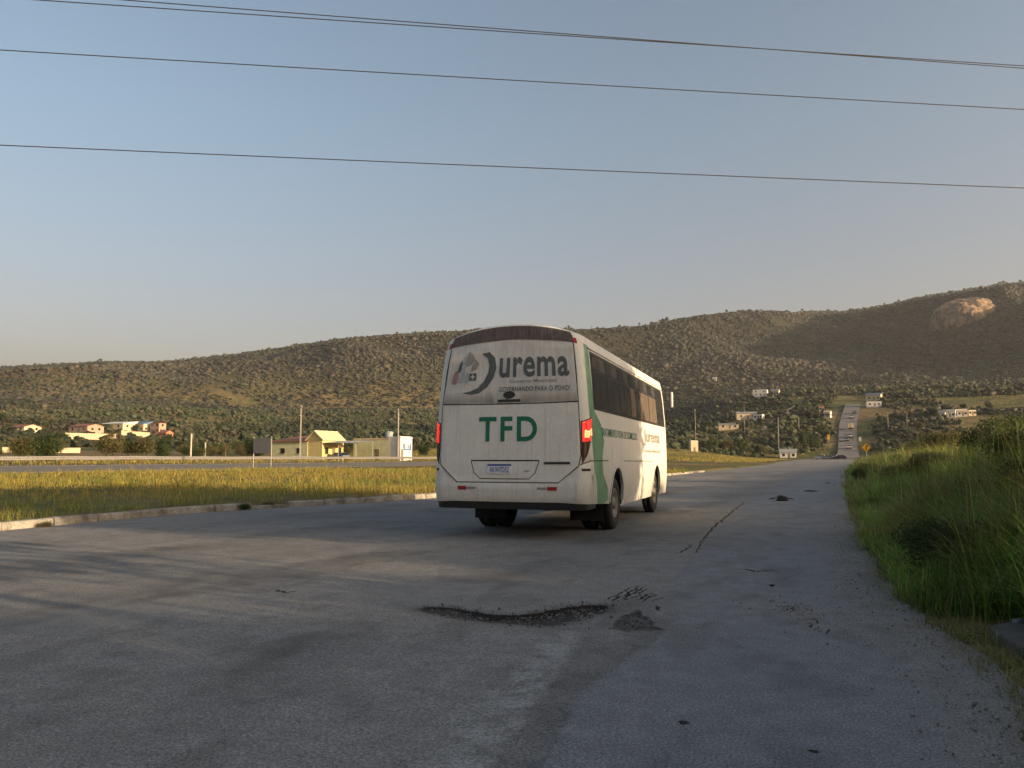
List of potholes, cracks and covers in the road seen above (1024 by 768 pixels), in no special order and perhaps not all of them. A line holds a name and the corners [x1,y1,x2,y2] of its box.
pothole [611,610,664,632]
crack [607,586,662,611]
crack [779,595,830,634]
crack [676,502,744,554]
pothole [419,605,609,626]
